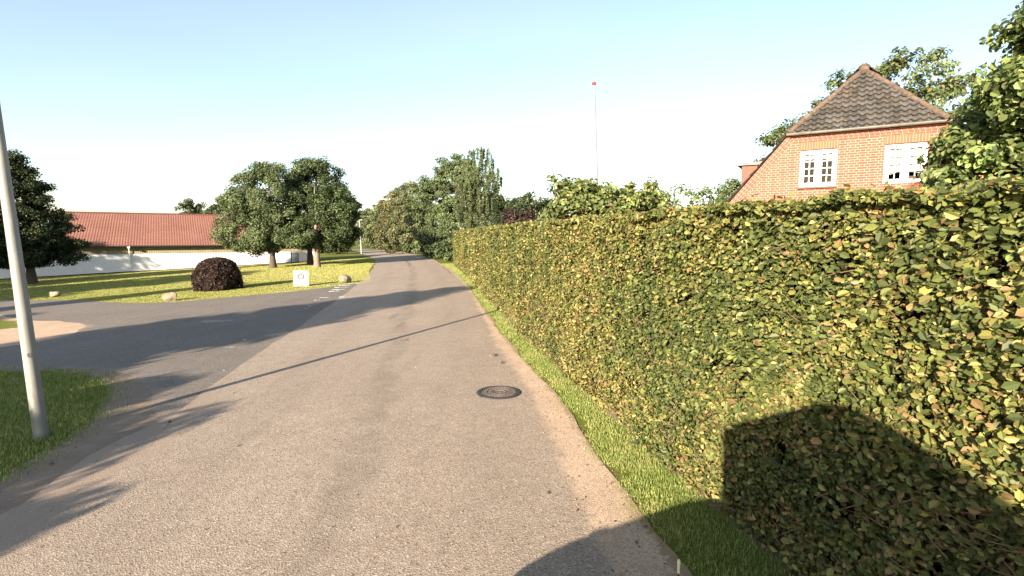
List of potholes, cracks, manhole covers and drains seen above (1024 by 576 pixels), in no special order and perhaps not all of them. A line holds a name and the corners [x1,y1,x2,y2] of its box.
manhole cover [476,386,521,400]
